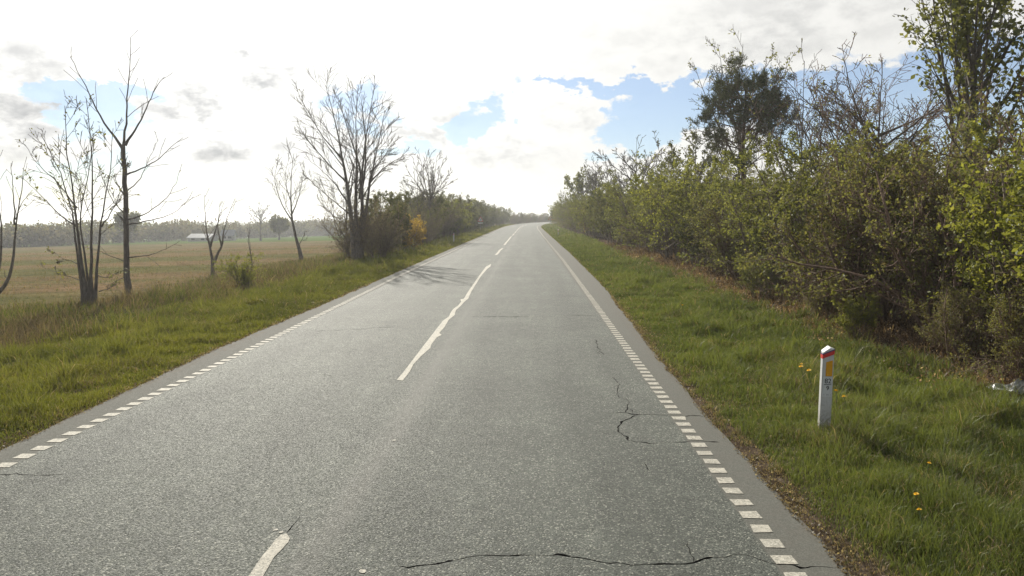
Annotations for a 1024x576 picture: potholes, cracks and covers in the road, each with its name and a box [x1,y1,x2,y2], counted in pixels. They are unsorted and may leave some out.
crack [399,543,832,569]
crack [603,377,715,444]
